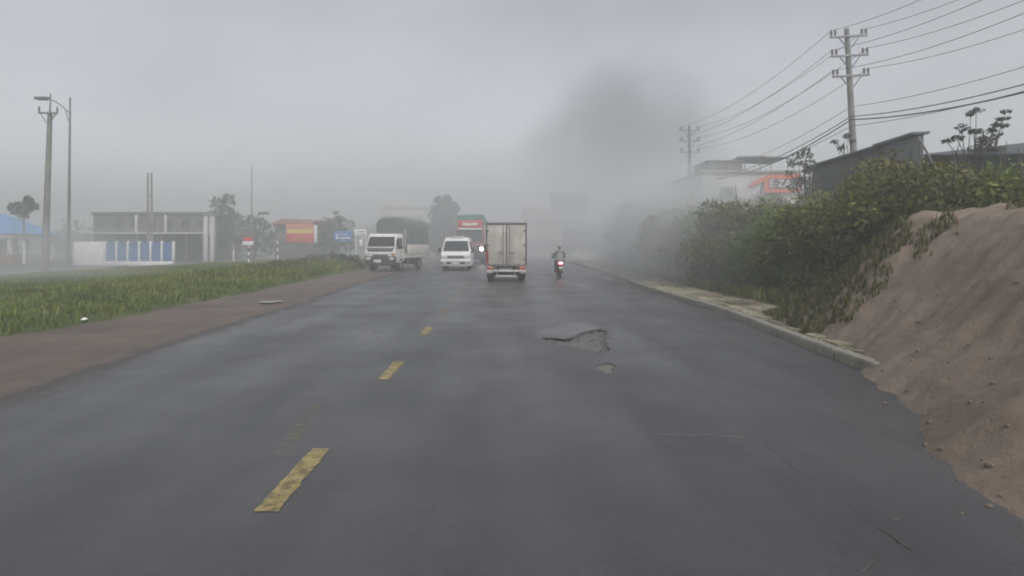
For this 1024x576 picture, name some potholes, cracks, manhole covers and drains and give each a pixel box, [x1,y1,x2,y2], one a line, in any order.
pothole [589,362,620,374]
pothole [536,329,614,356]
crack [652,433,918,571]
